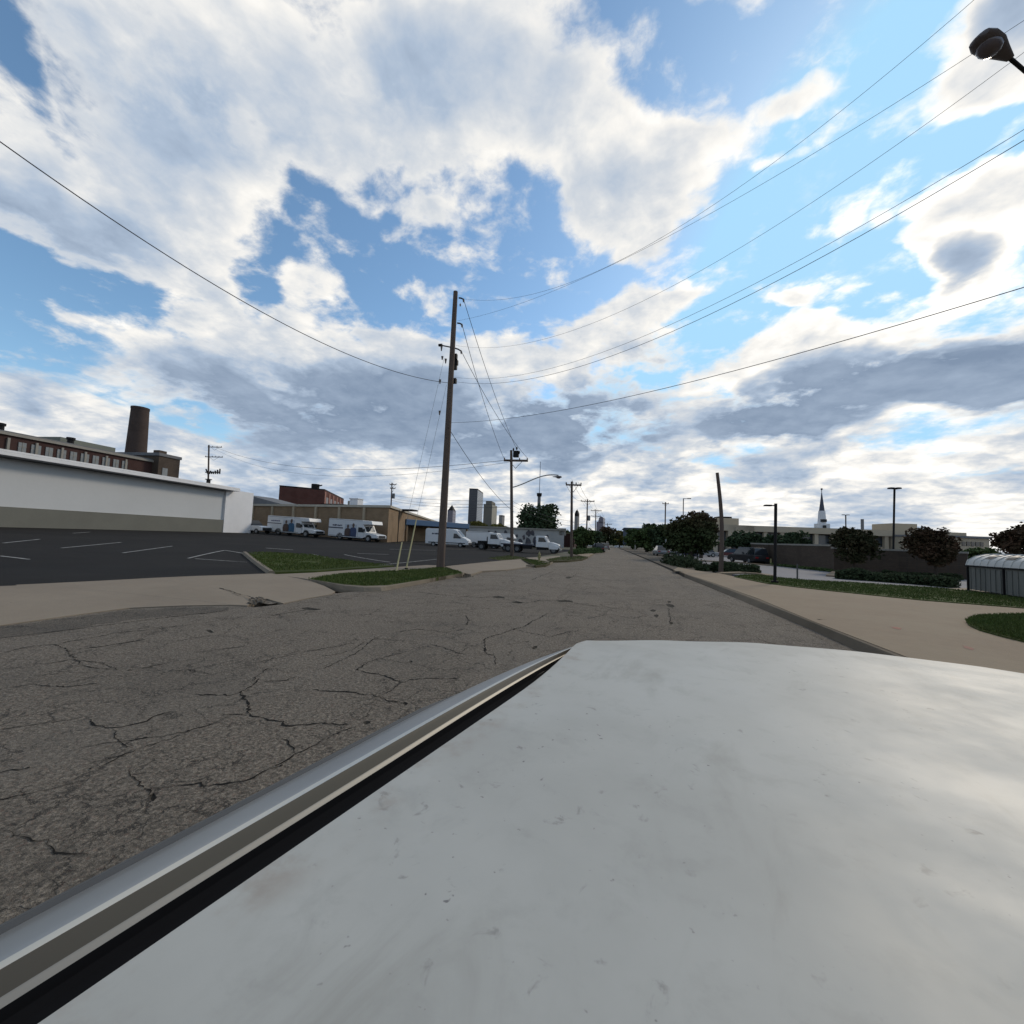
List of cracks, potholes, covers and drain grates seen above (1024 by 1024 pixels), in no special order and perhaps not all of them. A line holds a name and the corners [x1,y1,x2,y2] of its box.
crack [0,830,87,854]
crack [0,599,671,800]
